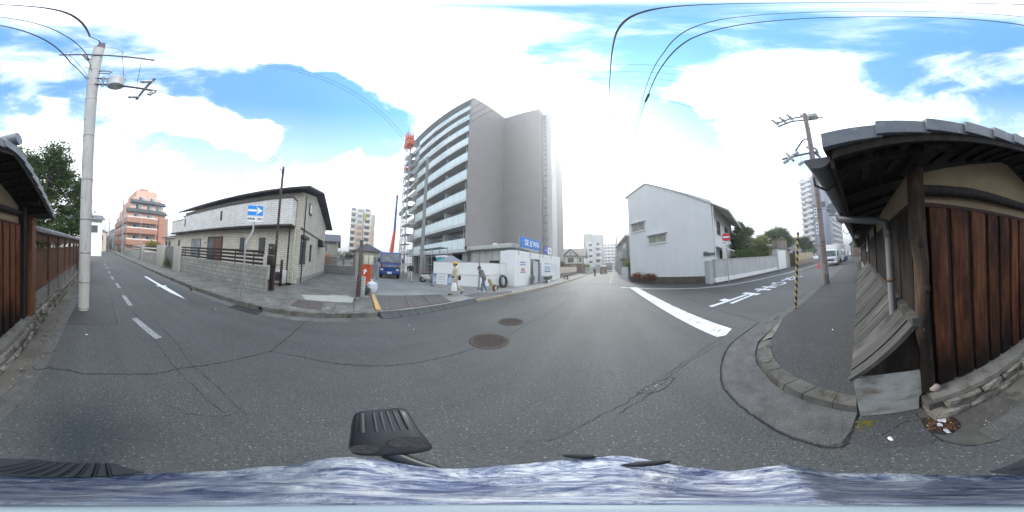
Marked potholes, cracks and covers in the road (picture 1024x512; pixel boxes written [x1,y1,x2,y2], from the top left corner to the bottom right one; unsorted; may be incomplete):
crack [526,338,721,443]
crack [52,324,476,375]
pothole [636,377,674,393]
drain grate [230,304,263,315]
manhole cover [498,318,524,326]
manhole cover [468,334,510,349]
